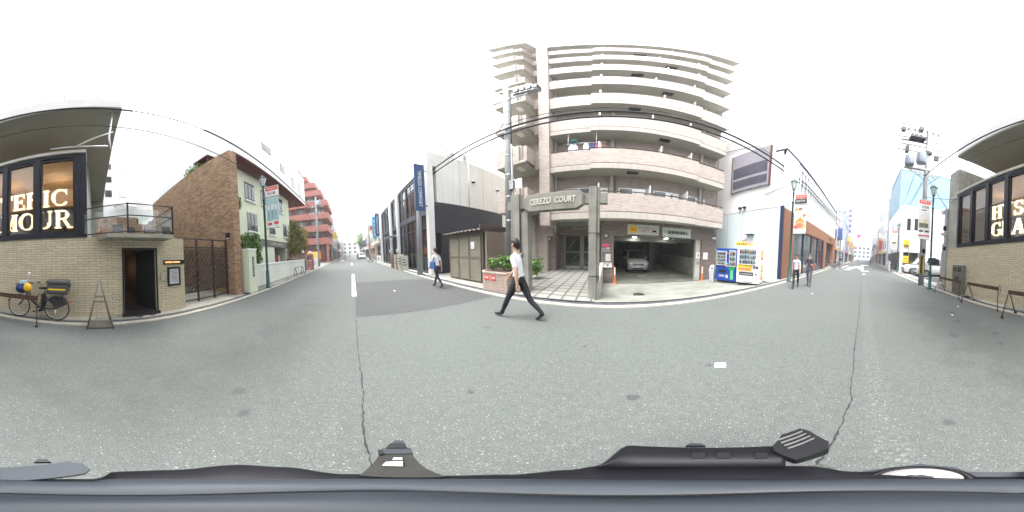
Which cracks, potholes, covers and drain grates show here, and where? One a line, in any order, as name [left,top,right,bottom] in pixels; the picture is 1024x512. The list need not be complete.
crack [814,280,862,469]
